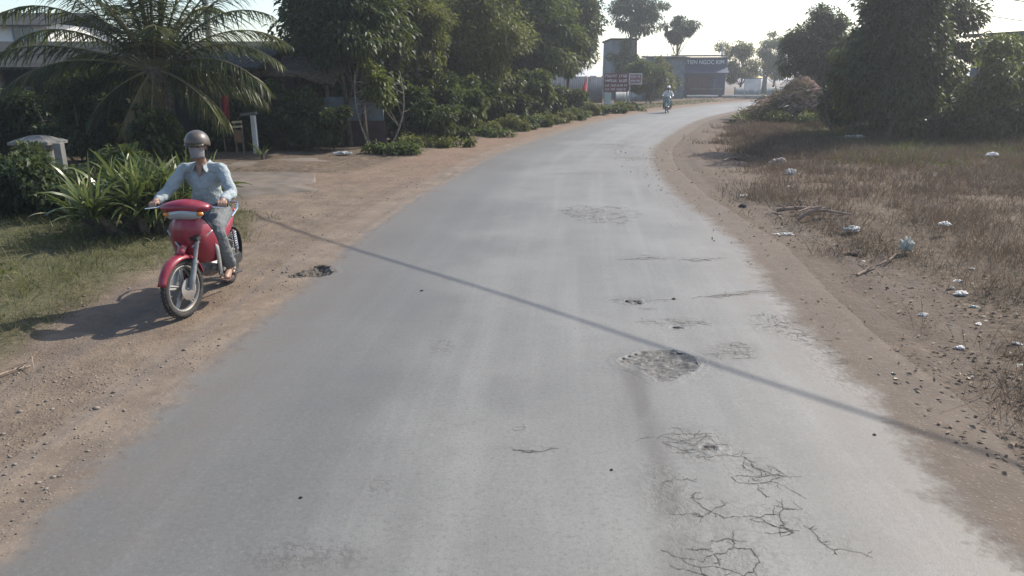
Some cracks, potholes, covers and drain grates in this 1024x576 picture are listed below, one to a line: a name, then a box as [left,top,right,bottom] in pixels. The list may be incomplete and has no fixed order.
crack [615,297,712,326]
pothole [615,297,653,308]
pothole [279,263,342,280]
pothole [607,346,711,387]
crack [636,427,873,576]
